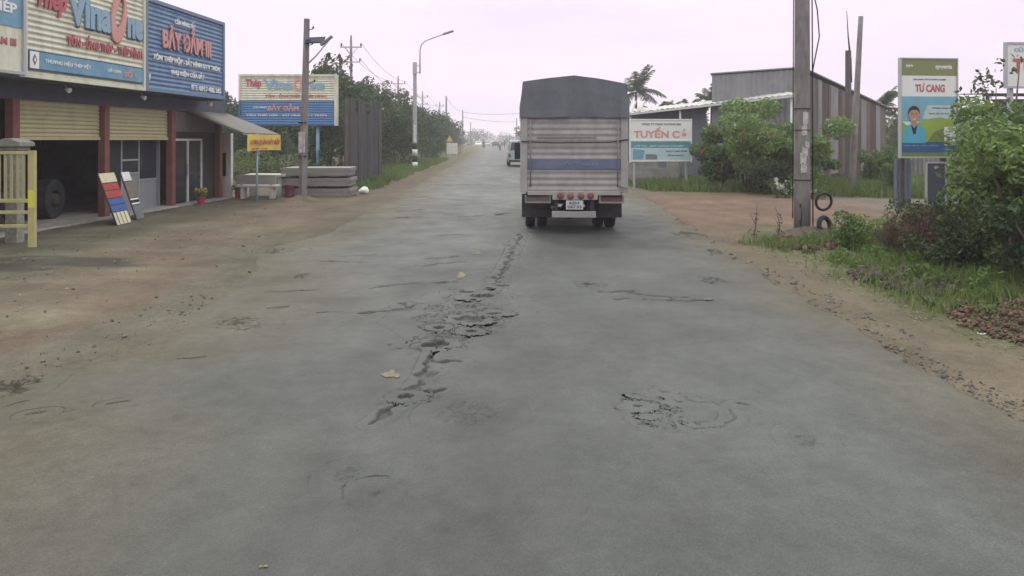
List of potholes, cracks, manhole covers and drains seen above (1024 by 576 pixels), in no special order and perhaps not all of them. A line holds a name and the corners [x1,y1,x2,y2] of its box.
crack [592,274,743,303]
crack [625,386,848,462]
crack [165,245,553,511]
crack [0,366,140,423]
